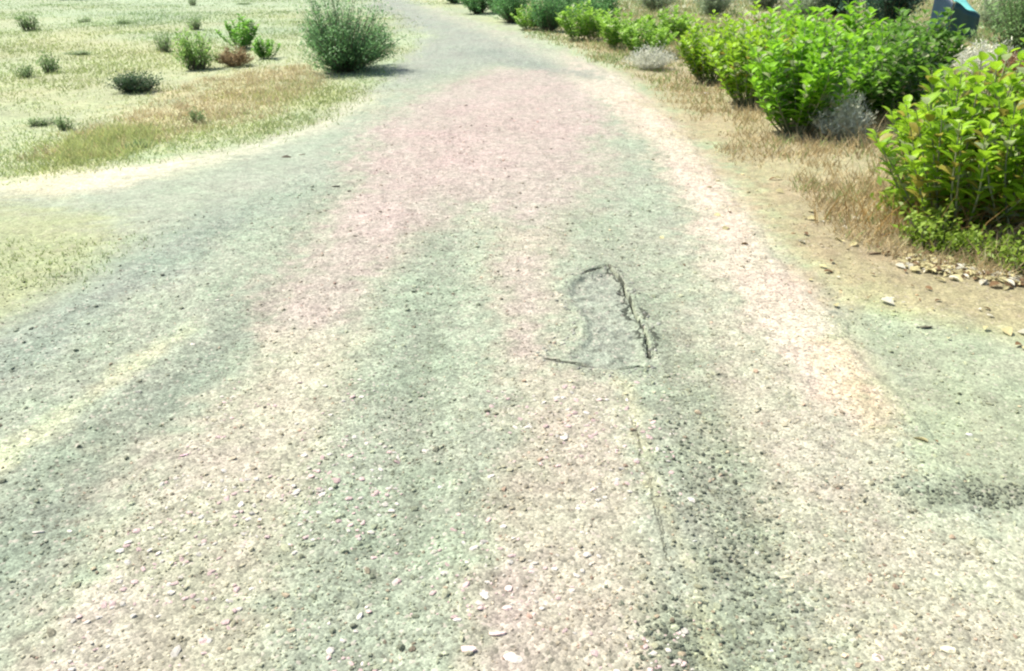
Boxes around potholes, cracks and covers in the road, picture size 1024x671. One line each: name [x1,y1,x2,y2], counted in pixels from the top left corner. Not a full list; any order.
crack [545,264,661,370]
crack [630,422,670,562]
